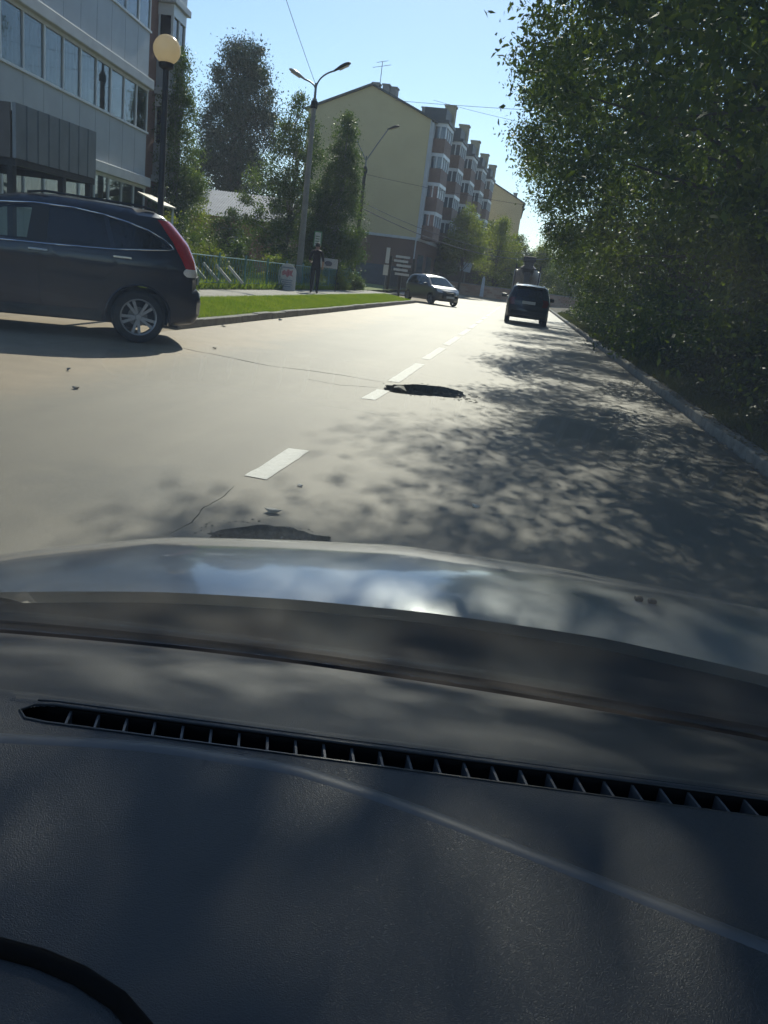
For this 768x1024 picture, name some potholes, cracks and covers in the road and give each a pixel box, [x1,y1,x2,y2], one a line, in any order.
pothole [194,519,339,542]
crack [178,347,379,388]
crack [166,486,234,536]
pothole [383,383,481,403]
